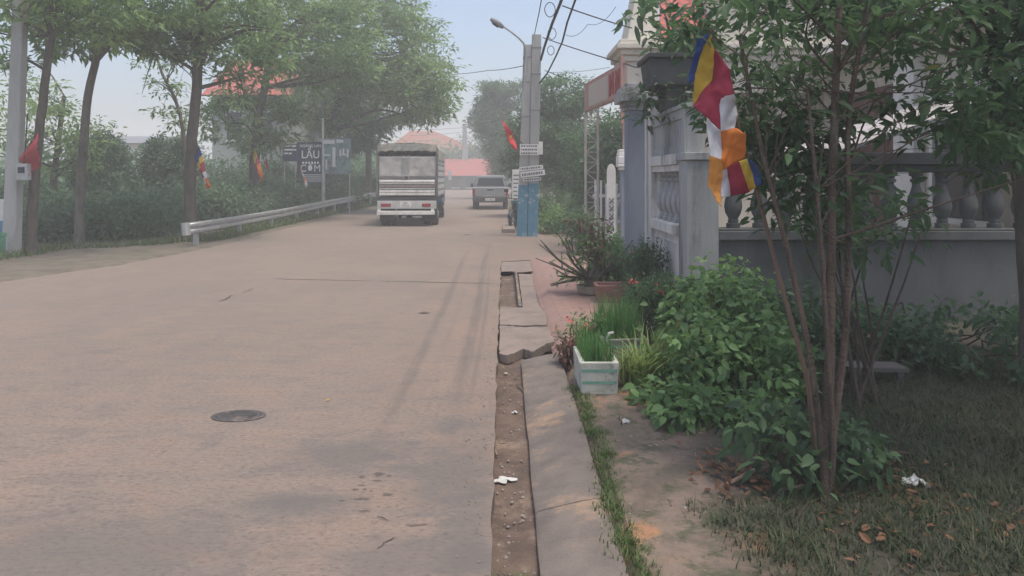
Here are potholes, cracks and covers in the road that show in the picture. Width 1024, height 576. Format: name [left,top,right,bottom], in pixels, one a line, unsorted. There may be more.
manhole cover [211,410,266,422]
